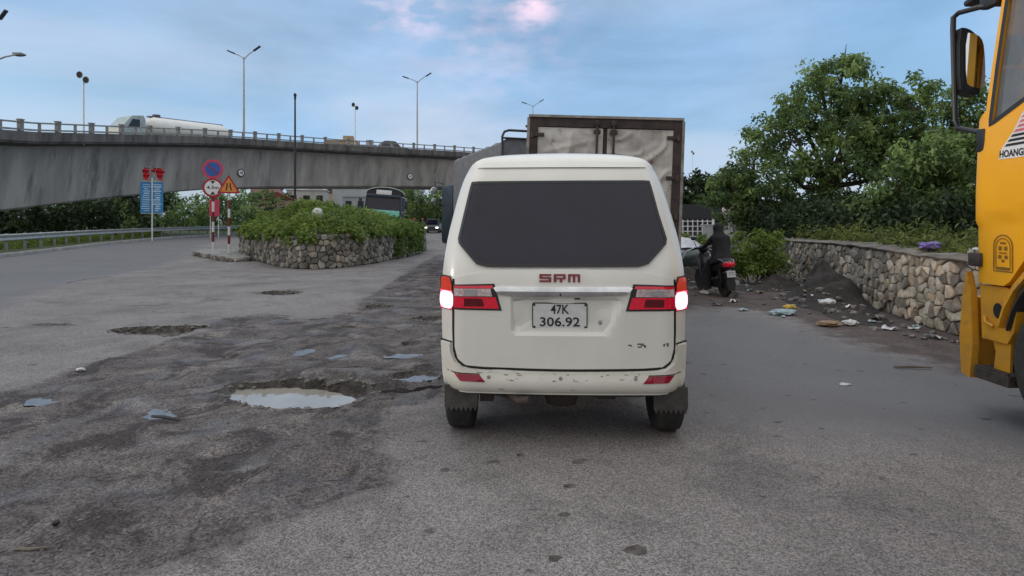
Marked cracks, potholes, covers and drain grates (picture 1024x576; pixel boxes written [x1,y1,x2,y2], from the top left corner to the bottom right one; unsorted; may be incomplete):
pothole [622,544,647,556]
pothole [200,376,382,410]
pothole [385,369,443,382]
pothole [107,323,212,337]
